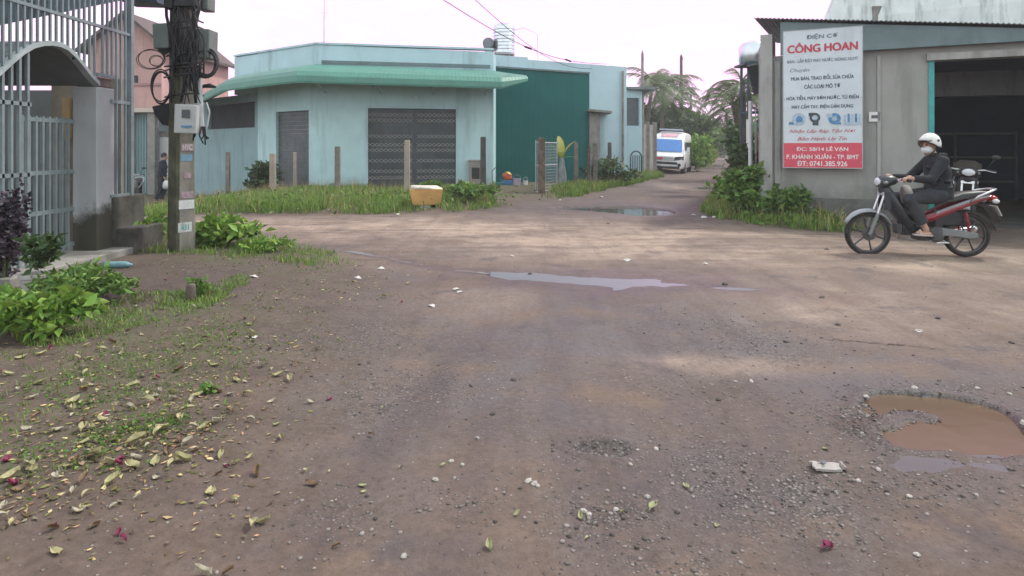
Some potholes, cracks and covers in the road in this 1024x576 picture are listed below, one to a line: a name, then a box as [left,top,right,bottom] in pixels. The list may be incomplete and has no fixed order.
pothole [845,387,1024,466]
pothole [553,433,650,465]
crack [820,337,943,350]
